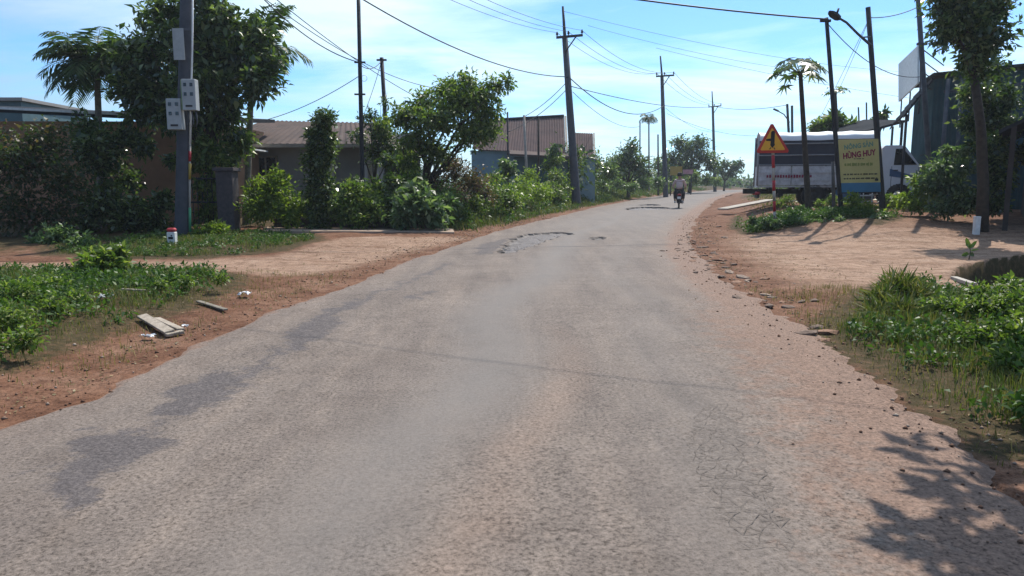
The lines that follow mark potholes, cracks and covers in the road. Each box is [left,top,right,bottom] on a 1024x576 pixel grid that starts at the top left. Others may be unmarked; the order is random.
crack [688,403,797,549]
pothole [492,232,577,254]
